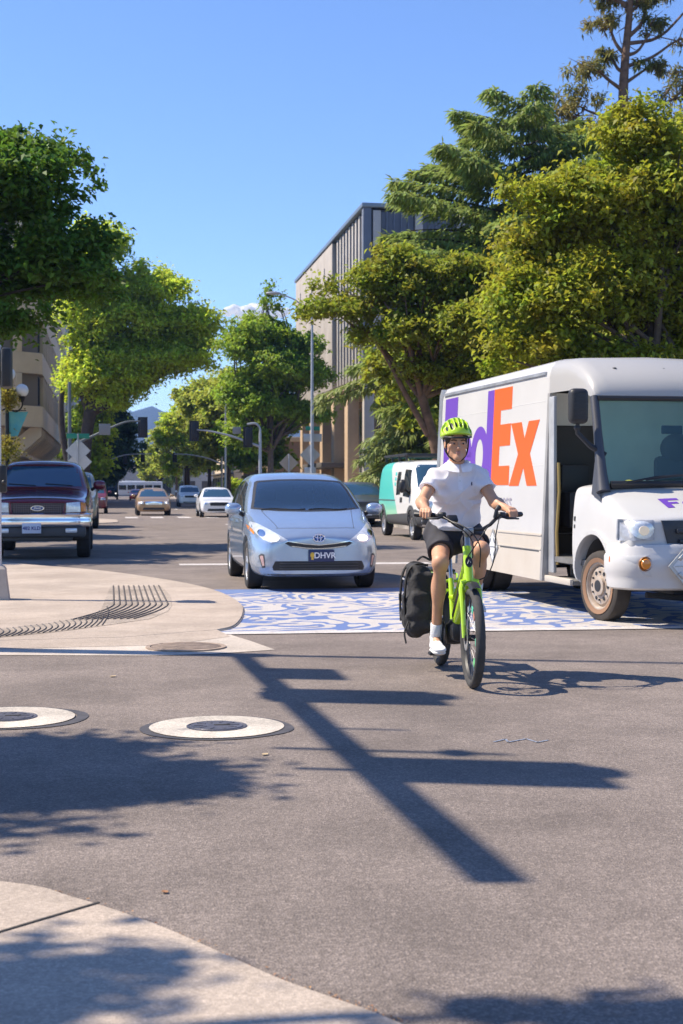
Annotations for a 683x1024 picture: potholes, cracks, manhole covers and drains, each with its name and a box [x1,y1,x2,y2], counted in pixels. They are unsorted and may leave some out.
manhole cover [139,716,294,740]
manhole cover [0,706,89,730]
